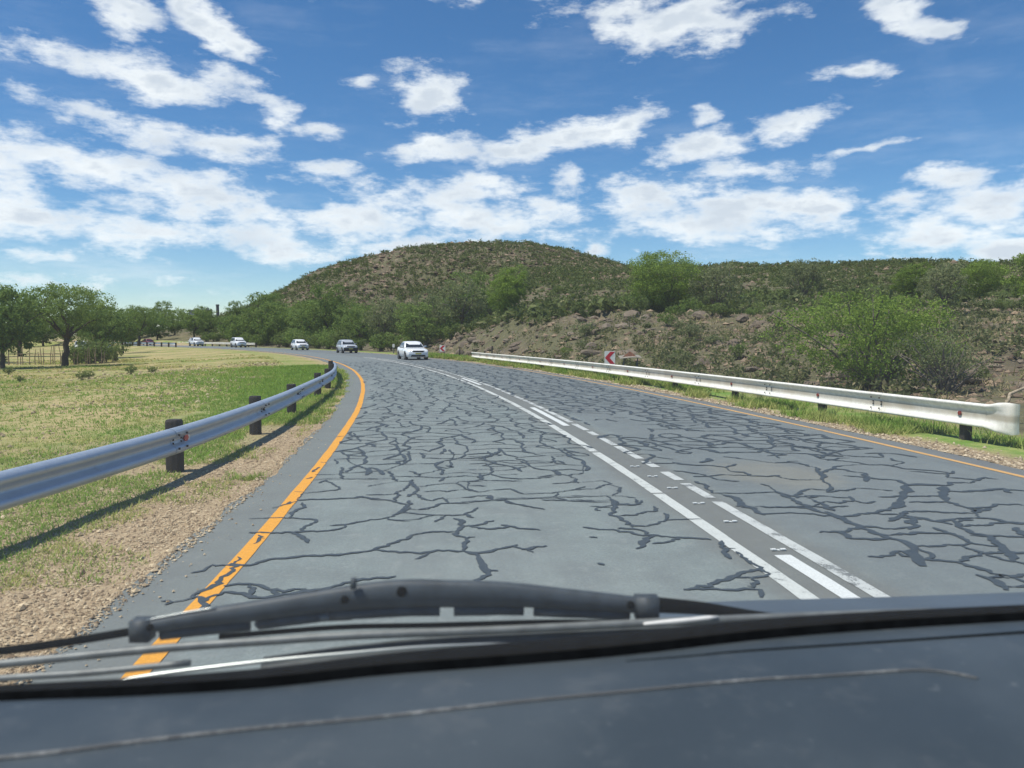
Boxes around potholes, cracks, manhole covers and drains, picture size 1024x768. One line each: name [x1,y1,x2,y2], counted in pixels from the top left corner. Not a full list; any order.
crack [161,361,1024,609]
